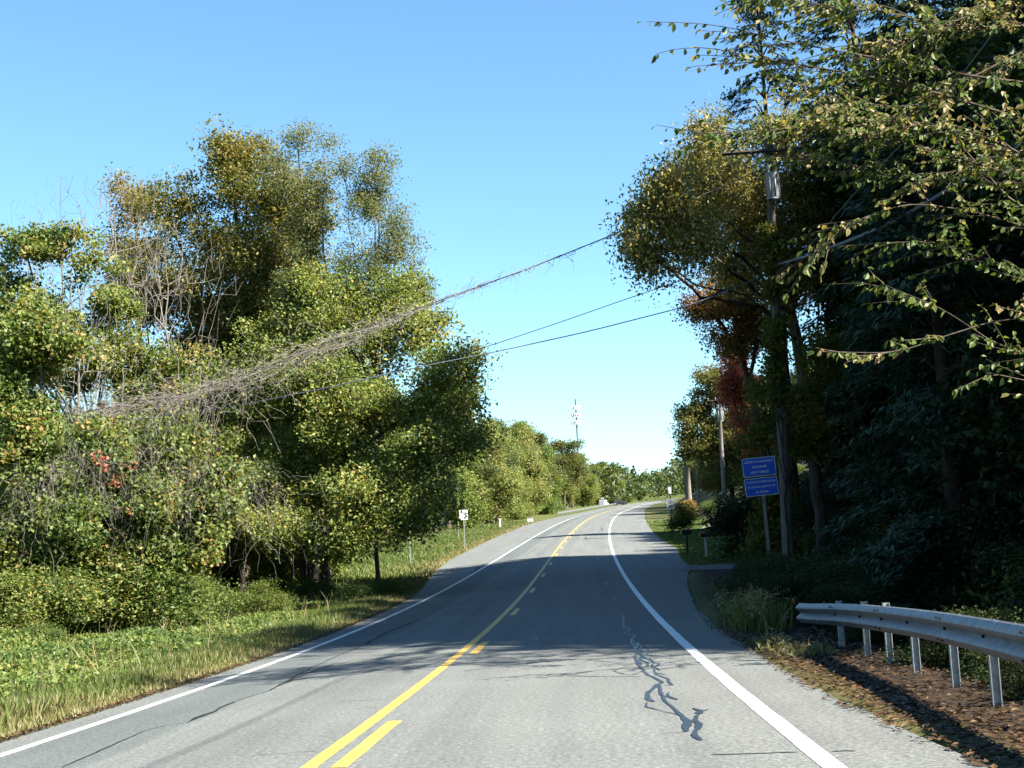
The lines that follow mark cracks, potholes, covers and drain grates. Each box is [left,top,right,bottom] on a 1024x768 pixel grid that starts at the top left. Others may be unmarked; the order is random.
crack [601,616,853,755]
